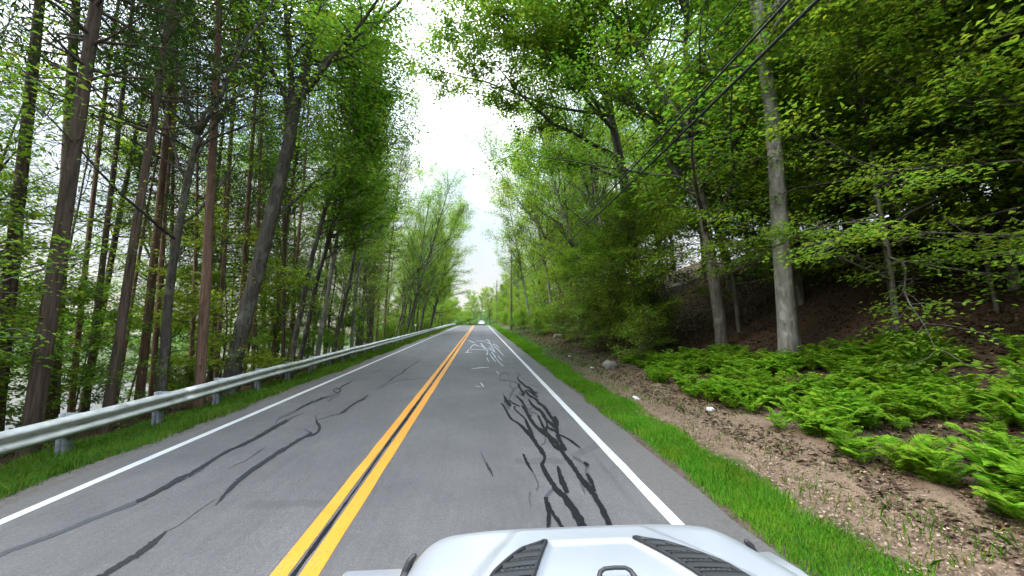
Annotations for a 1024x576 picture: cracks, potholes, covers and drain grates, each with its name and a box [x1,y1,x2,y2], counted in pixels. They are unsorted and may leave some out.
crack [522,454,540,507]
